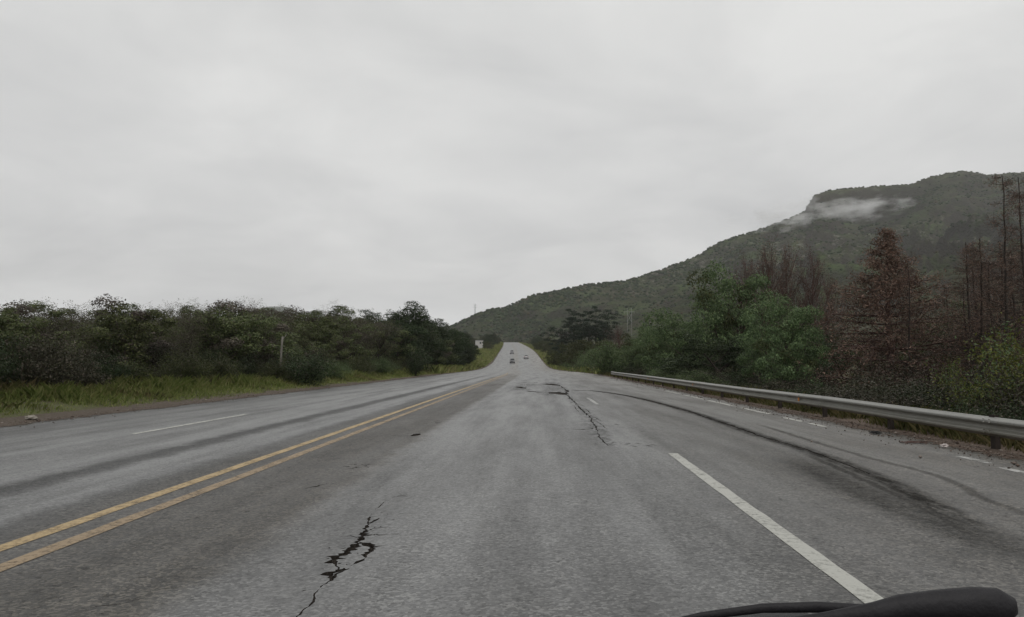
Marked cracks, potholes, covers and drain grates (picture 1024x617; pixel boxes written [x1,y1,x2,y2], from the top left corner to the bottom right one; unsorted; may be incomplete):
crack [296,496,398,617]
crack [561,386,658,447]
